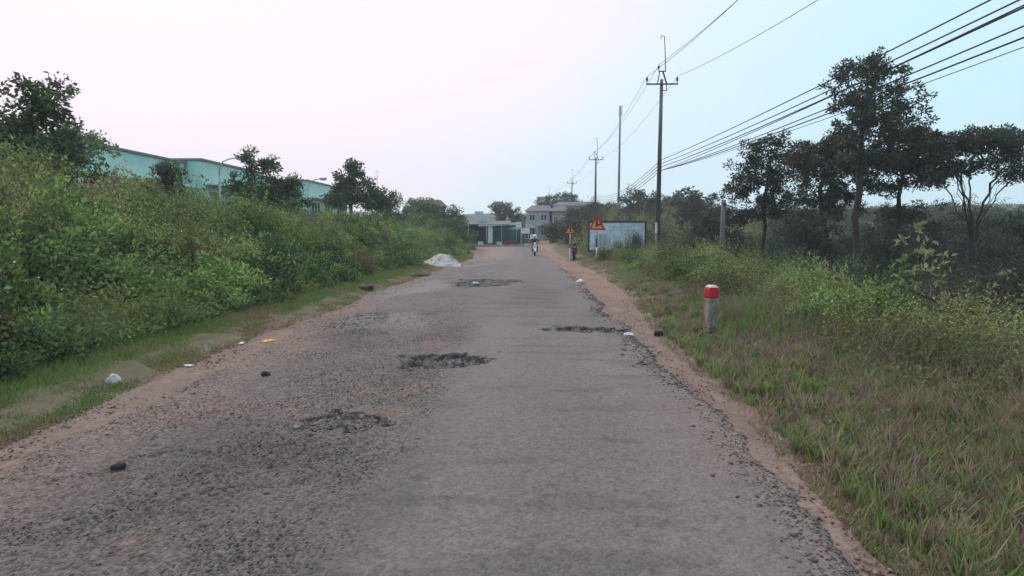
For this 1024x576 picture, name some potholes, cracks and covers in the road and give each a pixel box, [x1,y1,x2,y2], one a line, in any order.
pothole [293,411,395,434]
pothole [451,279,524,287]
pothole [397,352,501,372]
